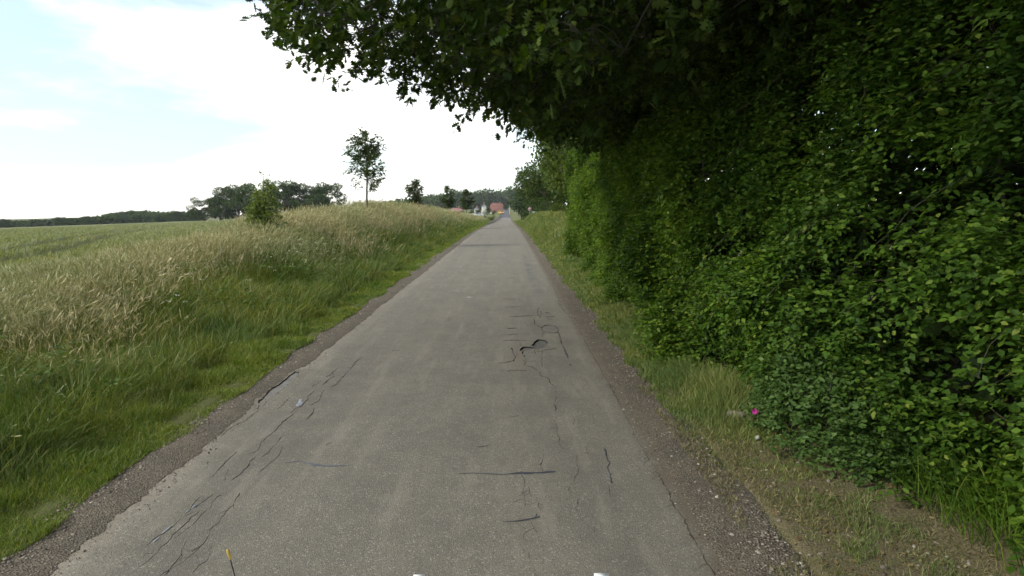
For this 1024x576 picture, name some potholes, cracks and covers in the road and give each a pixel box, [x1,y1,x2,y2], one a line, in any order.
crack [141,357,363,576]
crack [502,288,721,576]
pothole [531,339,548,350]
